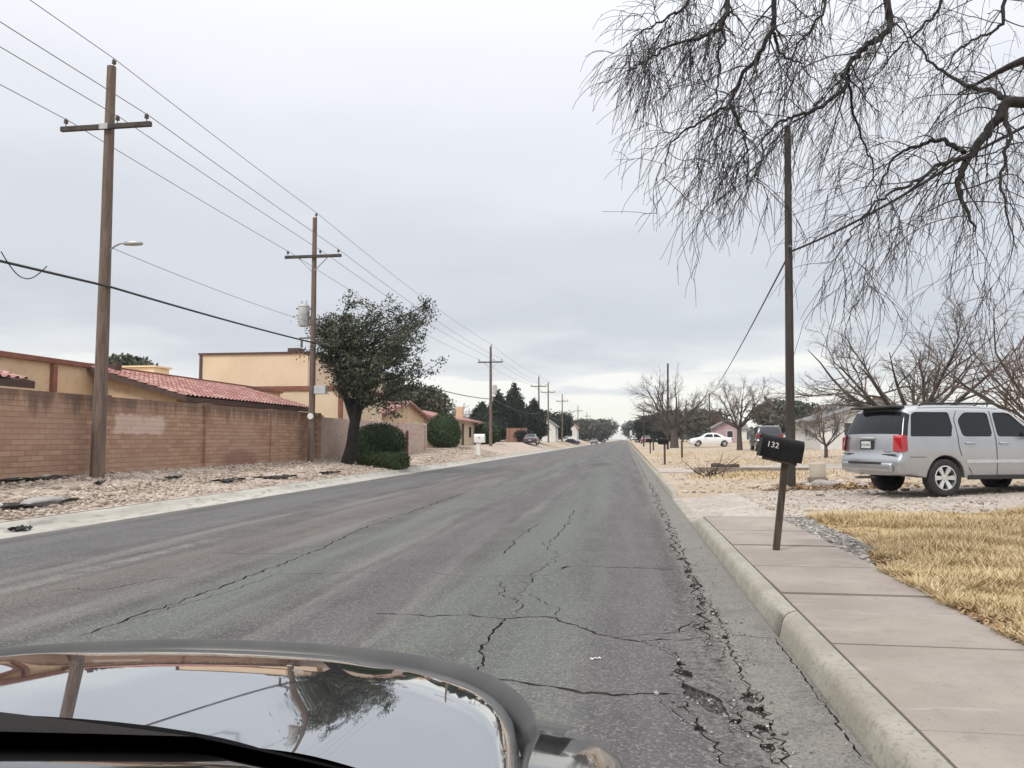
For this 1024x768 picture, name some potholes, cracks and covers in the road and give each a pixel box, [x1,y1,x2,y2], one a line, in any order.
crack [80,454,791,768]
pothole [681,682,729,717]
